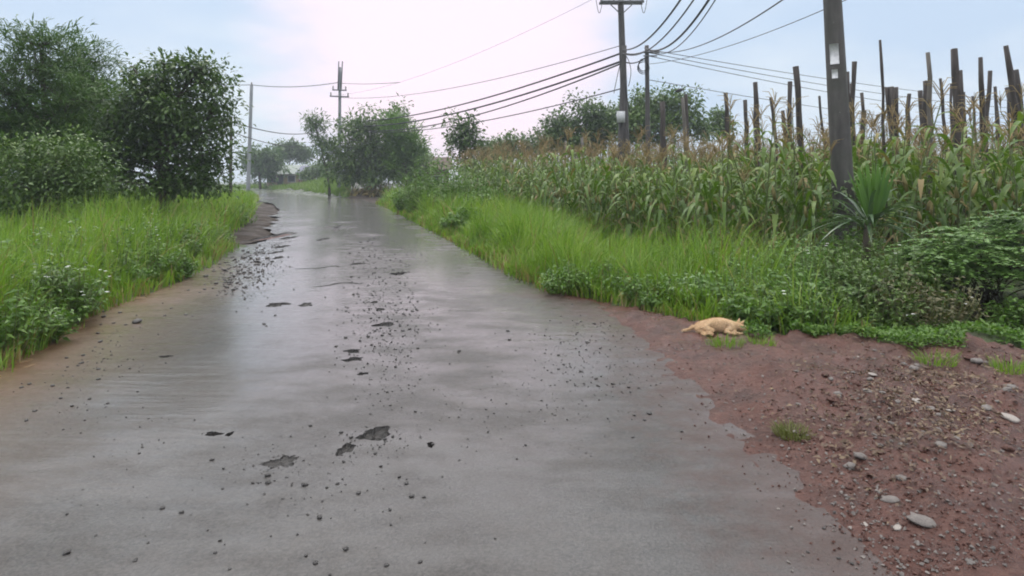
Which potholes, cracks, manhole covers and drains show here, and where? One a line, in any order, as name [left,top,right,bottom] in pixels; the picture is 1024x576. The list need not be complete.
crack [303,266,362,287]
pothole [335,443,356,456]
pothole [355,426,390,441]
pothole [260,455,298,469]
